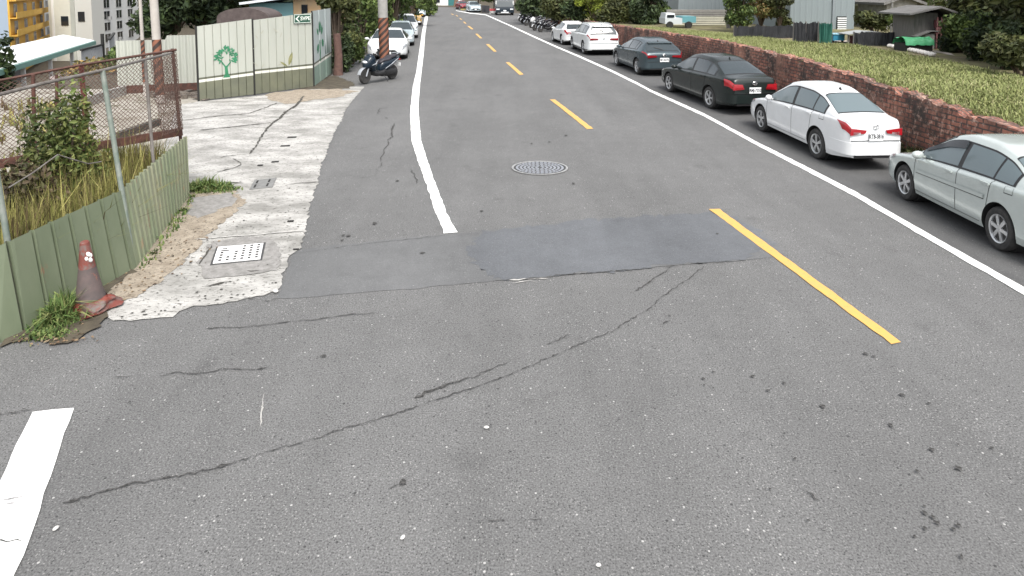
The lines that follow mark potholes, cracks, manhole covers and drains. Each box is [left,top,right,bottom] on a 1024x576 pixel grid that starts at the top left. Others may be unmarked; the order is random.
crack [158,367,266,376]
drain grate [210,242,266,265]
manhole cover [512,161,568,175]
crack [217,260,738,468]
